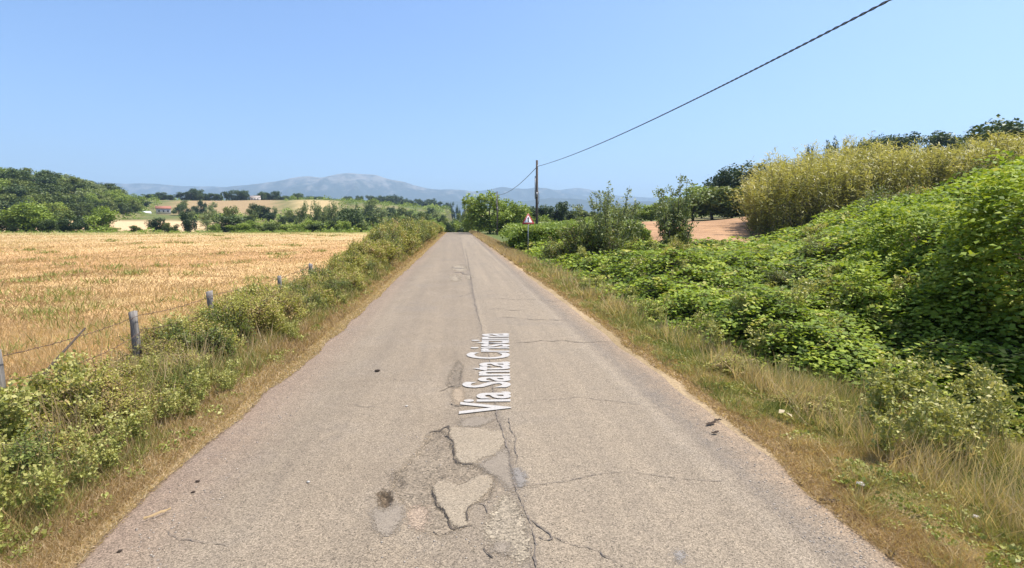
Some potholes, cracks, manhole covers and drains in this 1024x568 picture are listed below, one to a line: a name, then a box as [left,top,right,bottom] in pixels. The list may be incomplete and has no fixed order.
crack [529,472,731,485]
crack [431,425,480,465]
crack [432,490,488,533]
crack [525,511,625,567]
pothole [374,488,394,509]
